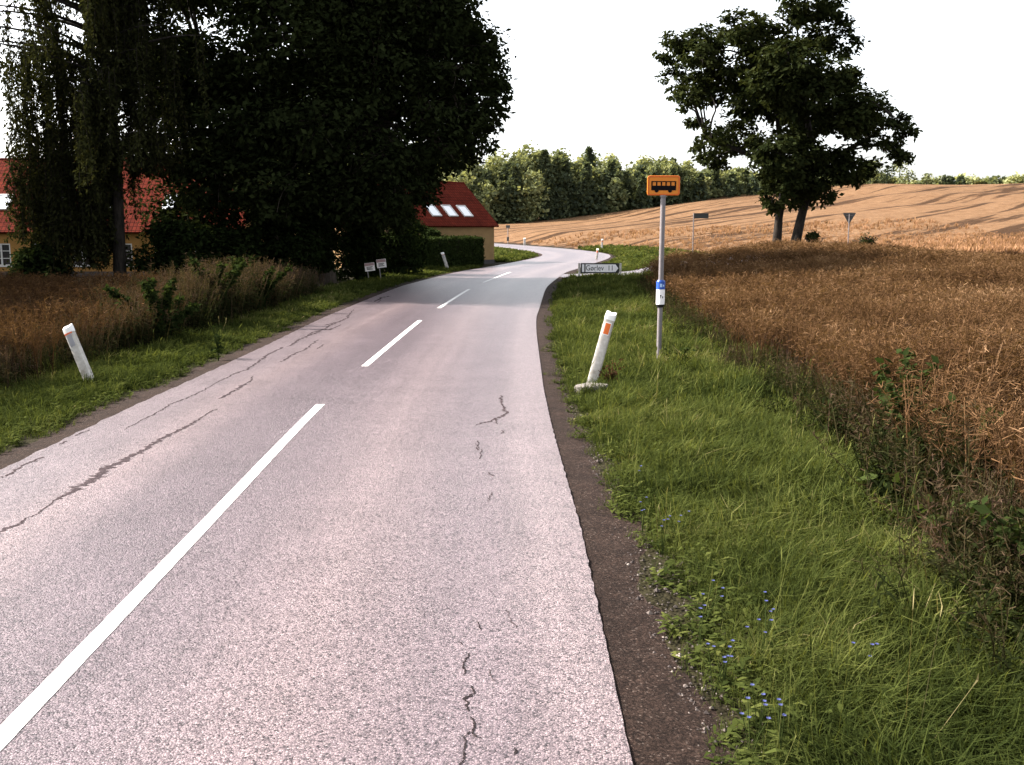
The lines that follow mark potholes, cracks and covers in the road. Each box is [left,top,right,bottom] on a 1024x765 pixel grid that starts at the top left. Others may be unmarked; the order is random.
crack [0,309,354,532]
crack [458,610,518,765]
crack [475,395,509,501]
